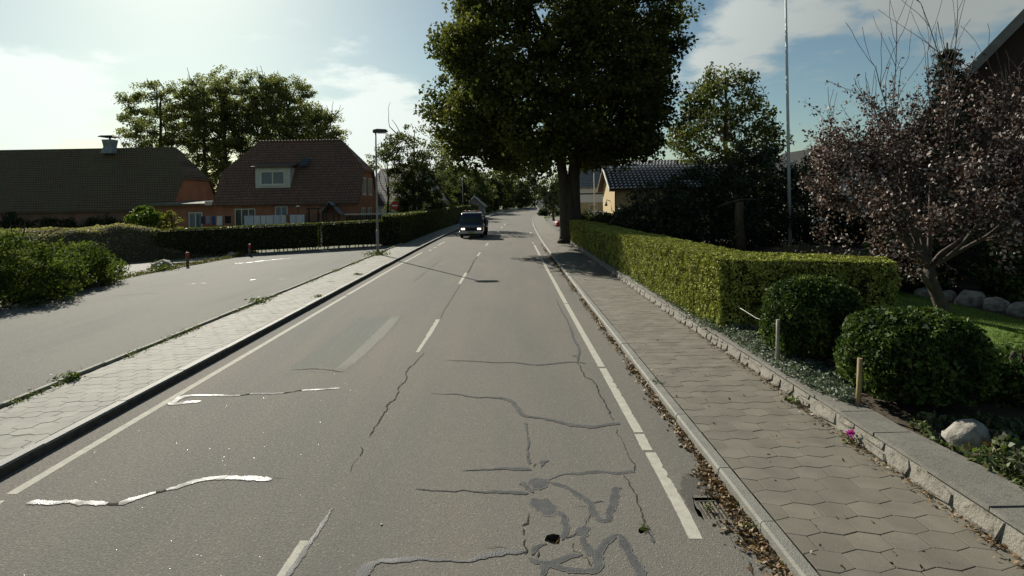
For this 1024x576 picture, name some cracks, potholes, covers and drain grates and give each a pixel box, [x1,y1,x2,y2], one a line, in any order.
pothole [545,534,560,544]
drain grate [695,500,737,519]
crack [350,353,424,470]
crack [578,364,646,524]
